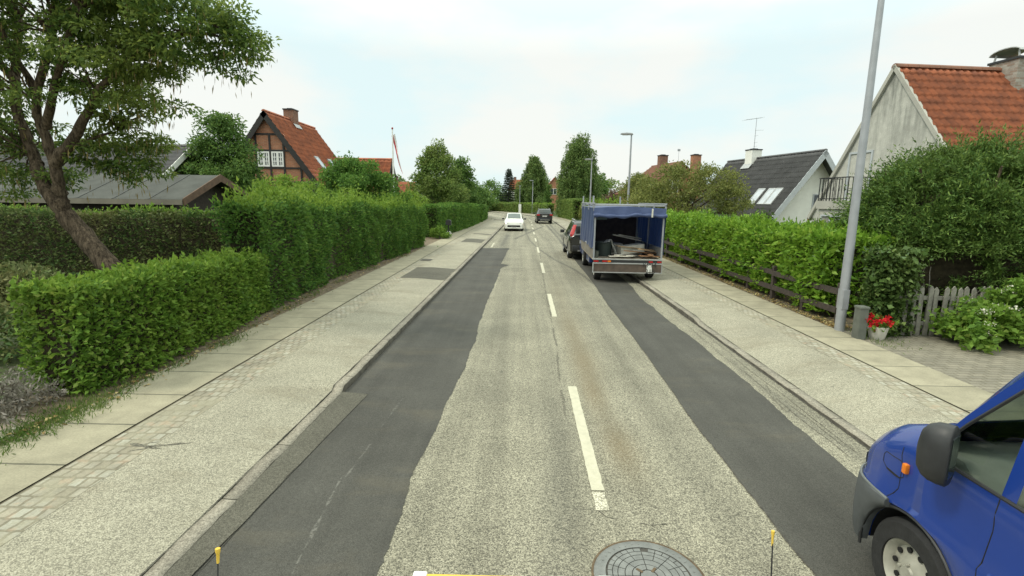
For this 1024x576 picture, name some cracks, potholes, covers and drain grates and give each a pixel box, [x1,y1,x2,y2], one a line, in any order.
manhole cover [591,540,705,576]
